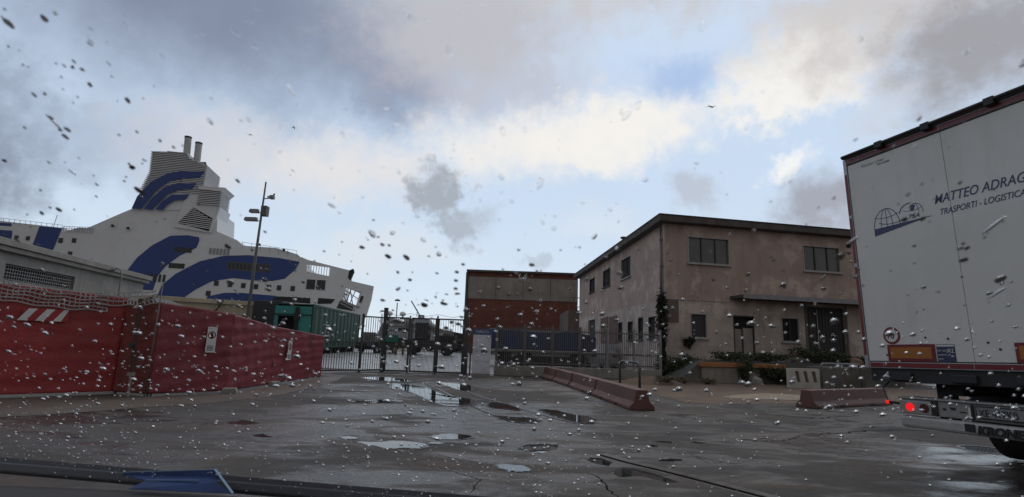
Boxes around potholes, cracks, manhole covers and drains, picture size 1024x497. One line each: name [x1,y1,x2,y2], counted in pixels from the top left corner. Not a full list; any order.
crack [417,454,490,494]
